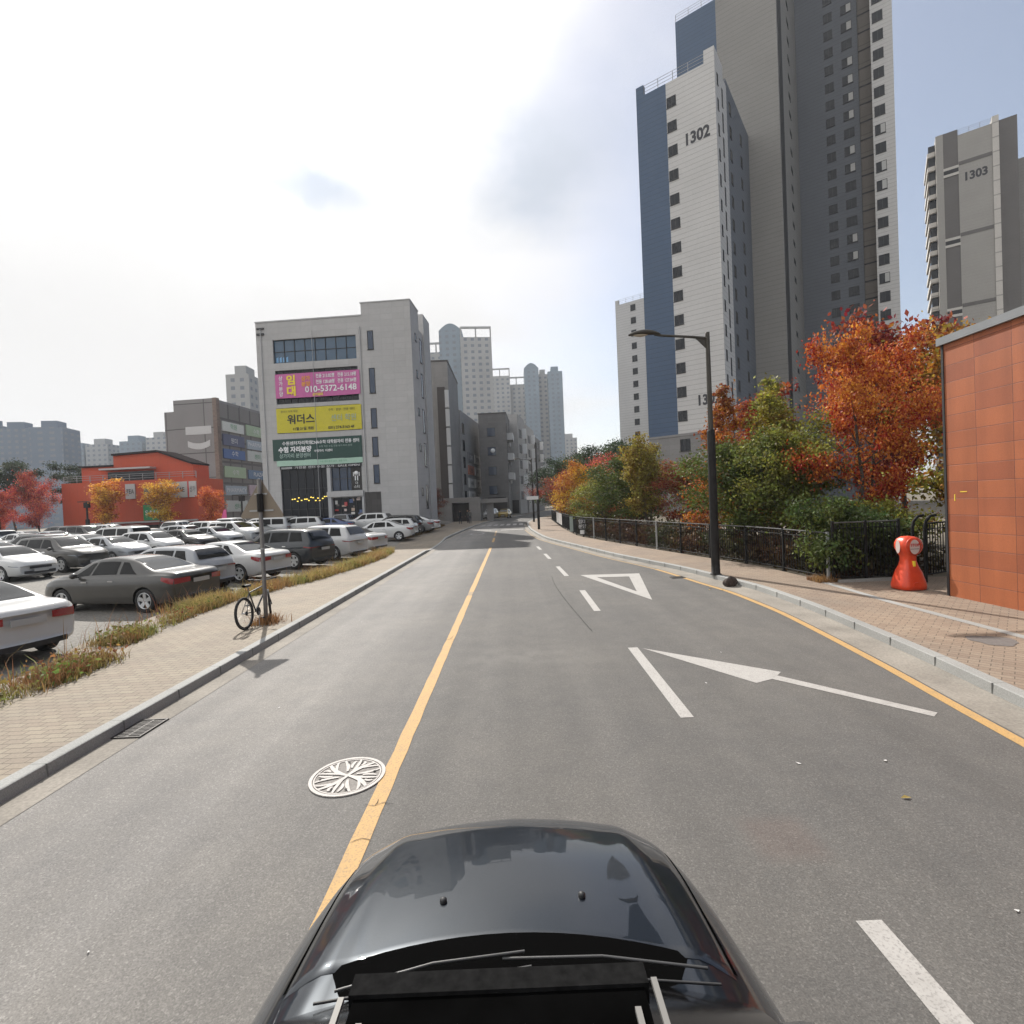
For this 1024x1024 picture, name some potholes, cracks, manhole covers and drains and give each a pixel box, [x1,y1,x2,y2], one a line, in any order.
drain grate [110,718,169,739]
manhole cover [308,757,386,797]
